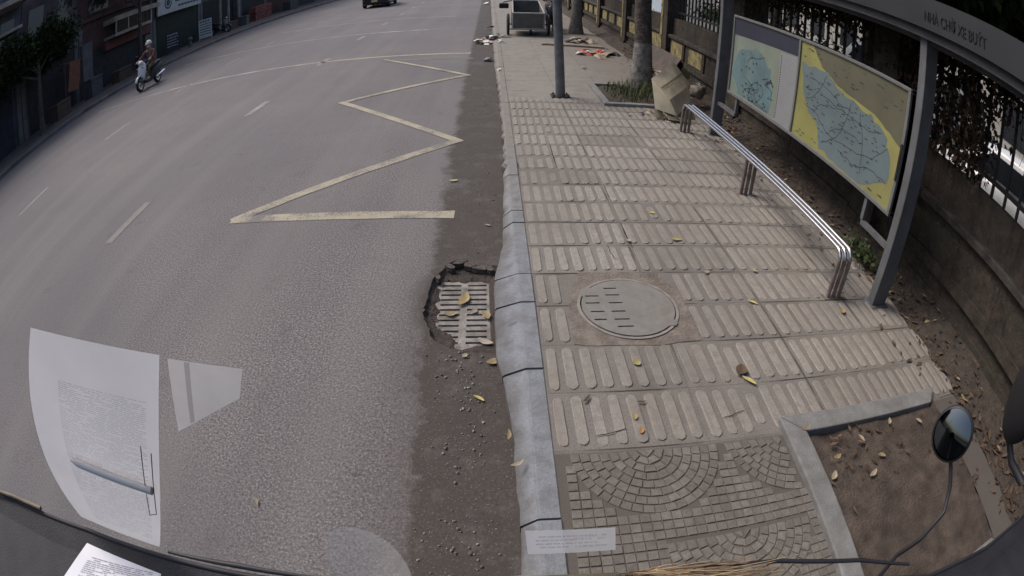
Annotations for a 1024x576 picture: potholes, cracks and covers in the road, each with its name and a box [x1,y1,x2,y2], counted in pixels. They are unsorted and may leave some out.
drain grate [435,282,491,350]
manhole cover [568,272,702,346]
